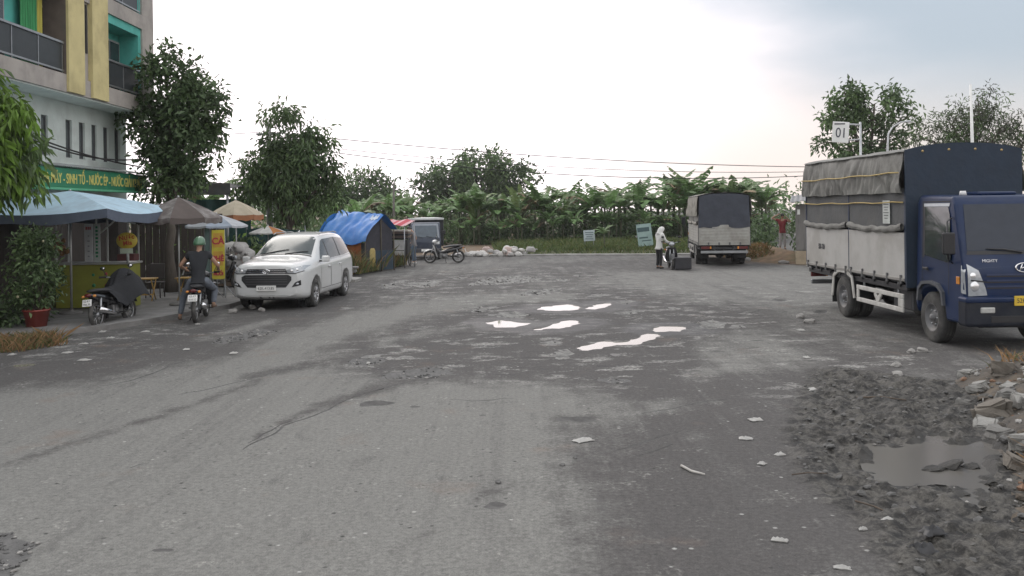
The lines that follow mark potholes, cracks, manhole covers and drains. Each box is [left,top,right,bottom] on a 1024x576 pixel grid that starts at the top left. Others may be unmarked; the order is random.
pothole [469,275,544,286]
pothole [484,501,507,509]
crack [105,361,439,449]
pothole [381,367,452,379]
pothole [239,329,277,340]
pothole [347,358,385,366]
pothole [212,331,259,344]
pothole [857,427,1007,512]
